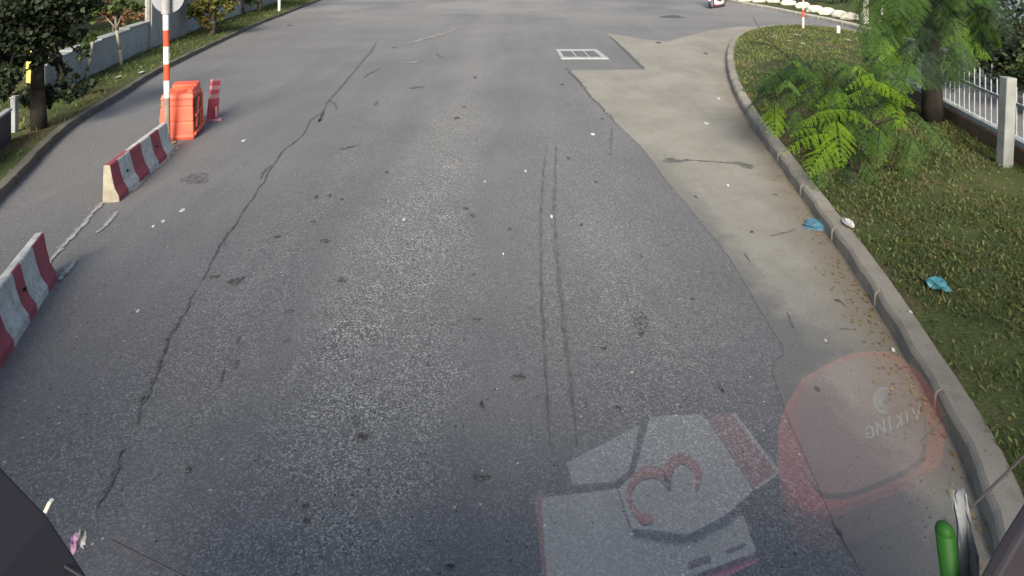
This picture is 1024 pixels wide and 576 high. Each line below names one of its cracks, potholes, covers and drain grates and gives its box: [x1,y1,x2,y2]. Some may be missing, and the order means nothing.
drain grate [556,49,609,59]
crack [134,42,398,424]
crack [96,448,124,510]
crack [665,158,752,167]
